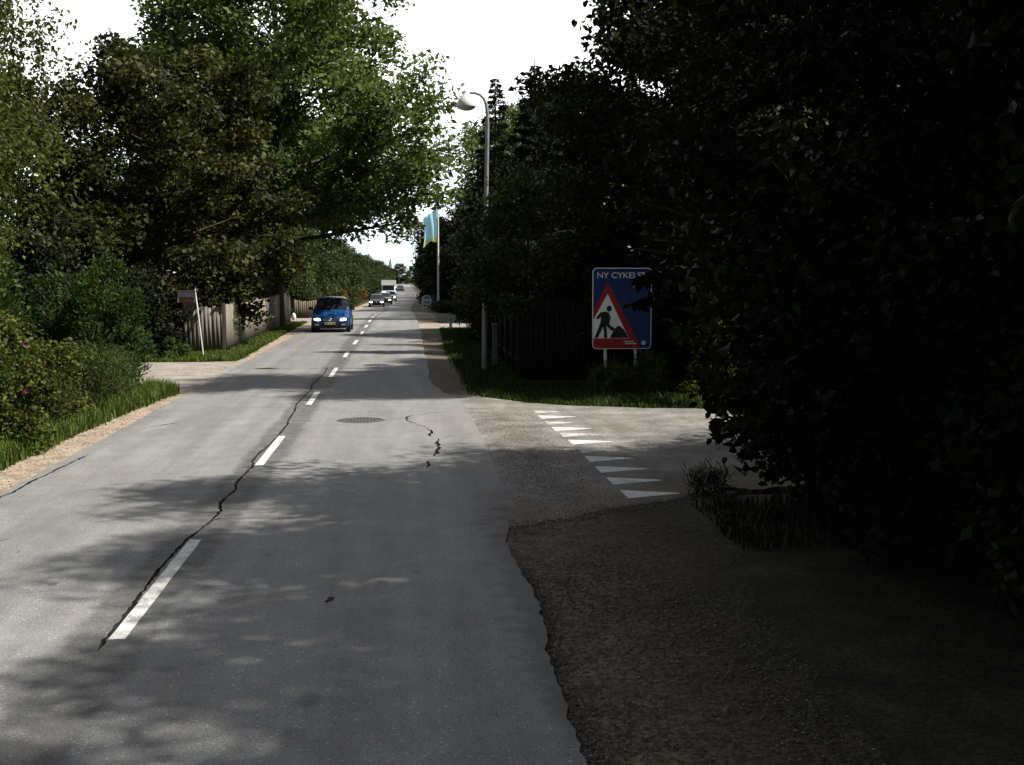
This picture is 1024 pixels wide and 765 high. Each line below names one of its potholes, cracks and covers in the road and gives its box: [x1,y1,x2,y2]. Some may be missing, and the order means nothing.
crack [0,367,328,652]
crack [386,412,449,468]
